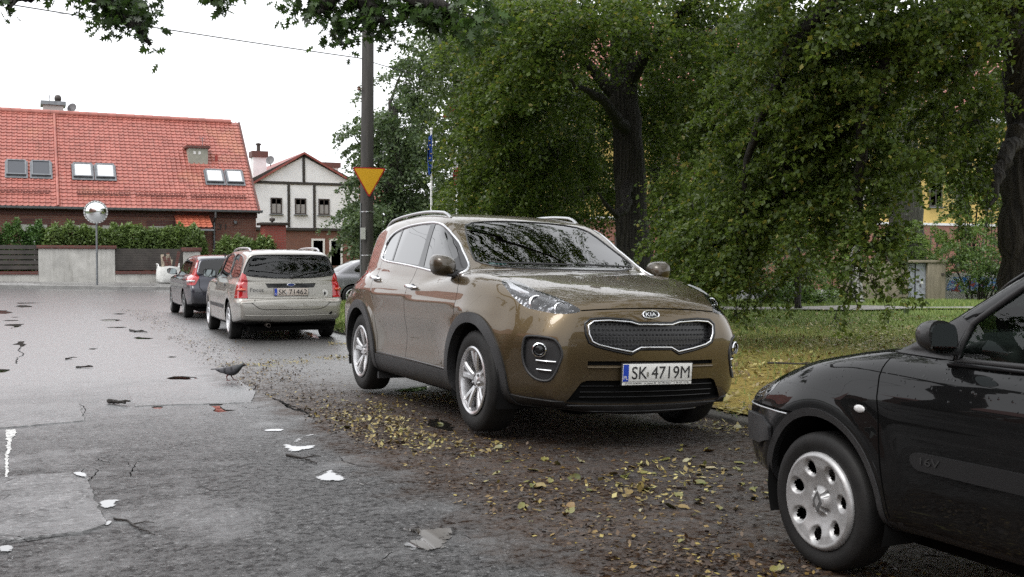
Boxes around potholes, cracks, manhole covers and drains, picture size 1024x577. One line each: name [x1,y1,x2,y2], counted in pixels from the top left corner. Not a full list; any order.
crack [58,458,154,479]
